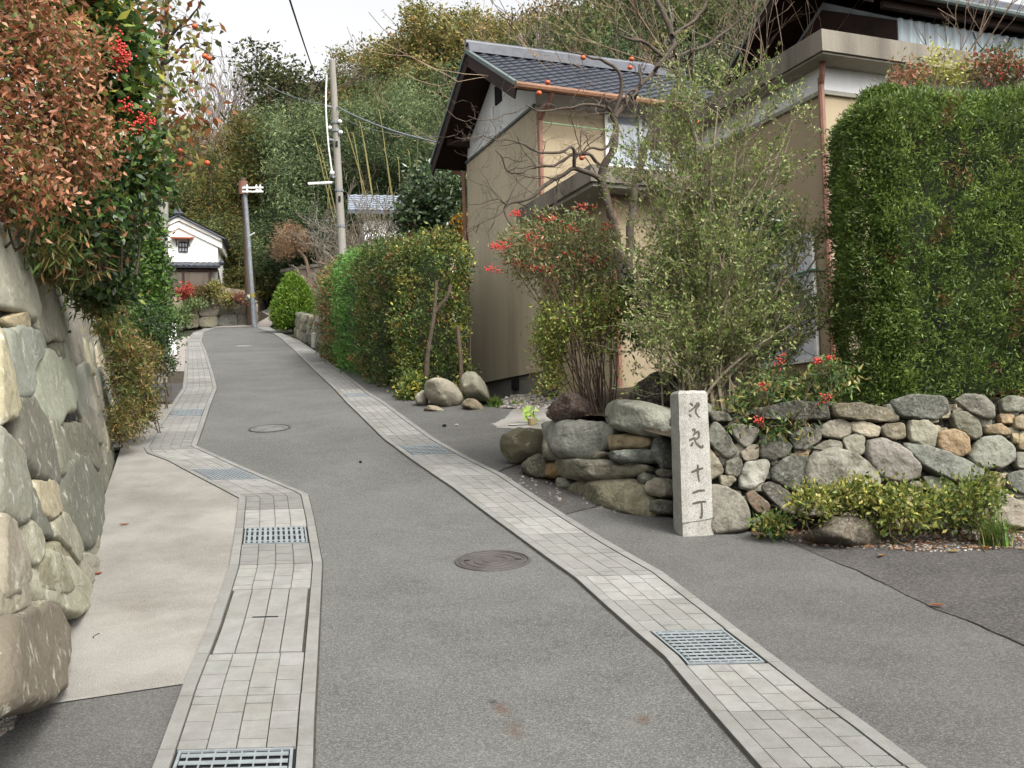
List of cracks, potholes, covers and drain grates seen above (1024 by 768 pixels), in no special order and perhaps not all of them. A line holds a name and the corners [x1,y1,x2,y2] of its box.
manhole cover [455,550,531,571]
drain grate [171,747,296,768]
drain grate [650,629,765,666]
drain grate [242,526,309,545]
manhole cover [248,424,291,433]
drain grate [400,444,454,455]
drain grate [193,468,262,480]
drain grate [169,408,204,416]
